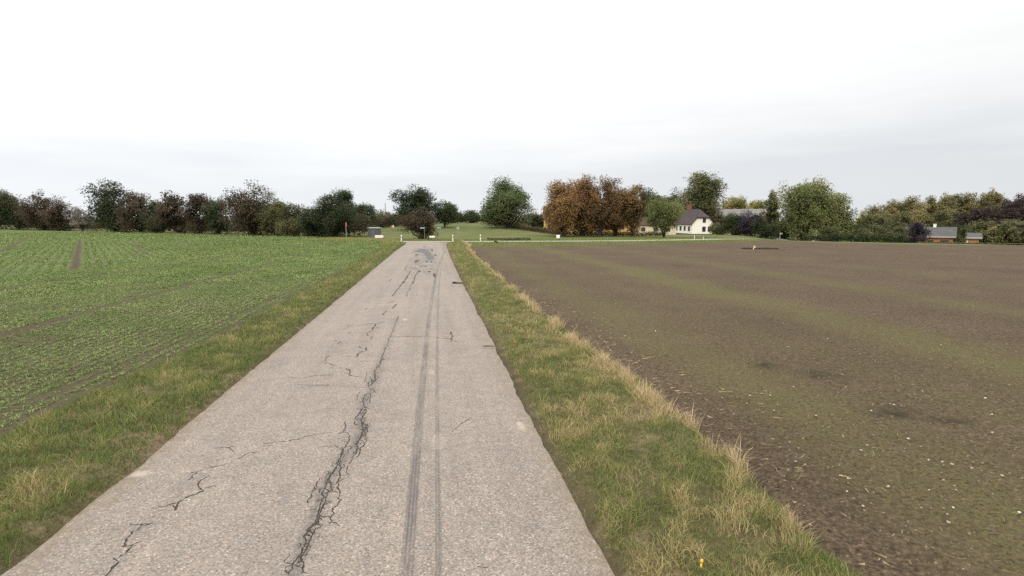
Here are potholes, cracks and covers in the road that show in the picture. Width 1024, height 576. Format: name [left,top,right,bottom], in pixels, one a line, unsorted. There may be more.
crack [105,265,457,576]
